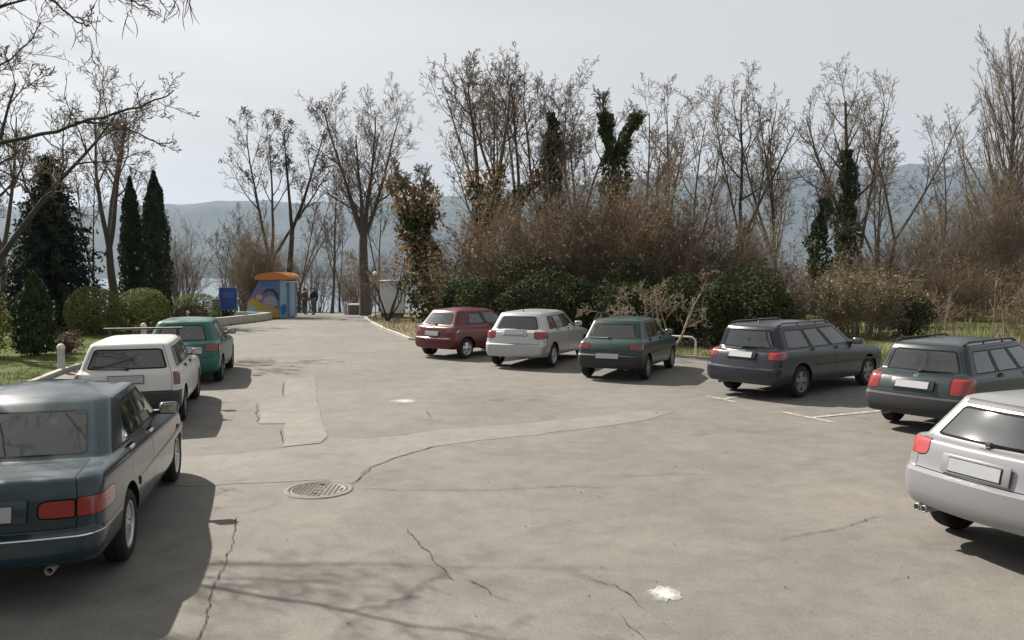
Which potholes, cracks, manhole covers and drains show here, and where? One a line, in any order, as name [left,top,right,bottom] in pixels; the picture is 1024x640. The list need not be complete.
crack [196,504,274,640]
crack [352,410,589,490]
crack [588,576,647,640]
crack [407,529,510,600]
